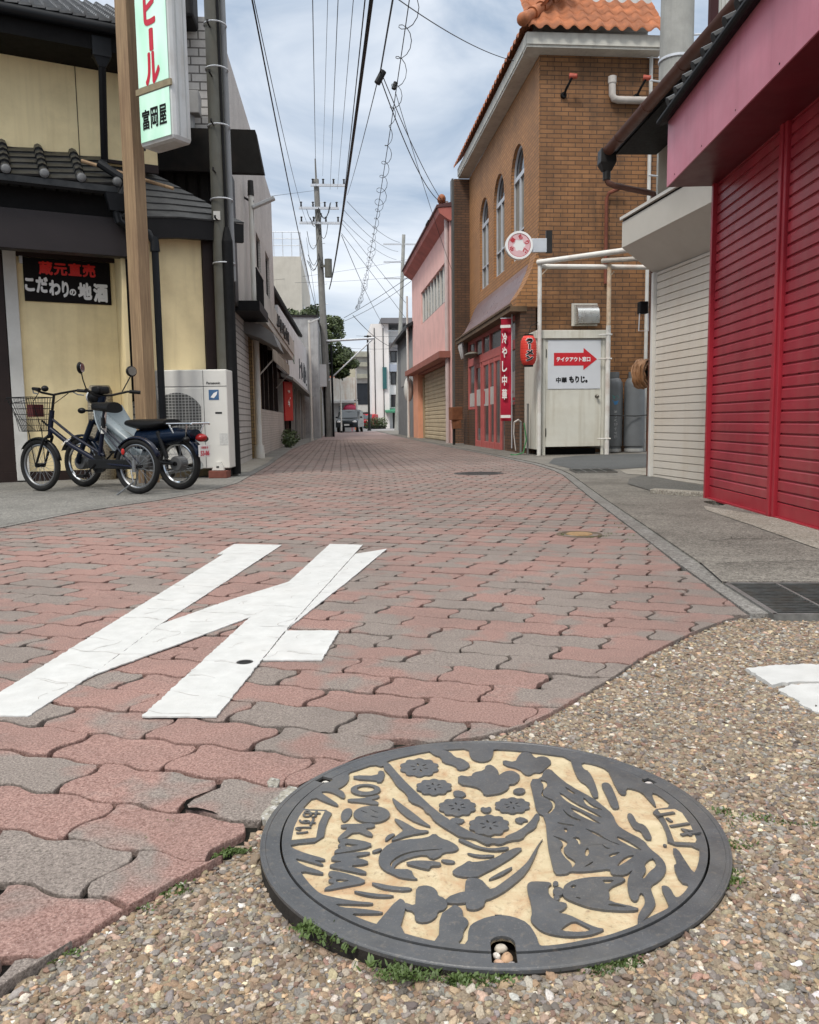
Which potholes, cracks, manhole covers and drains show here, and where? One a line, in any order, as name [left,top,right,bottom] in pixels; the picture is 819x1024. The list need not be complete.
drain grate [723,582,819,621]
manhole cover [260,741,732,976]
